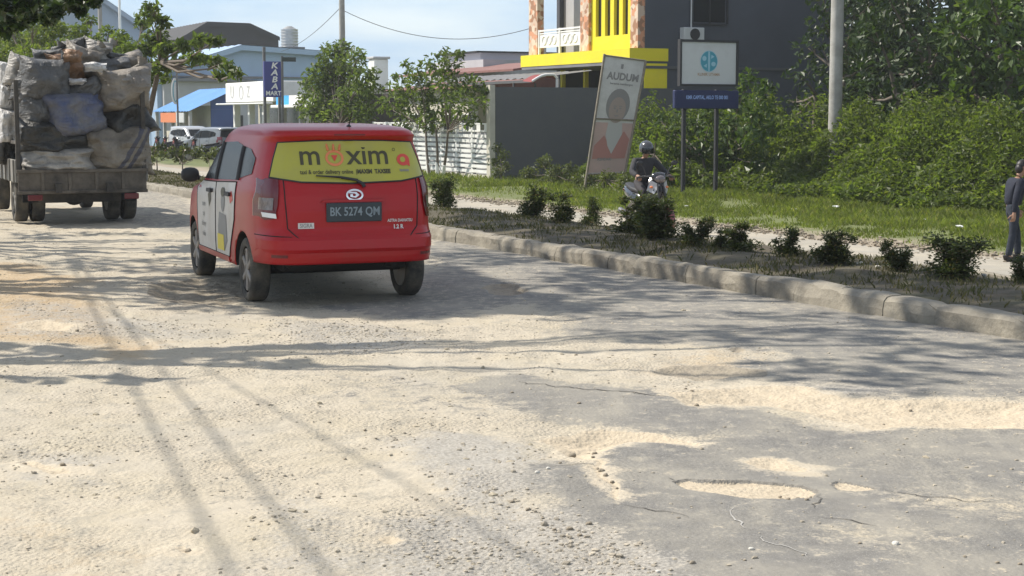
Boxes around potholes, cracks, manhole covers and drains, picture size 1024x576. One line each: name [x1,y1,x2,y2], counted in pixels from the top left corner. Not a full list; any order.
pothole [654,383,1024,432]
pothole [812,477,894,494]
pothole [661,475,835,502]
pothole [521,425,720,510]
crack [519,381,650,395]
pothole [638,364,782,382]
pothole [726,453,826,477]
